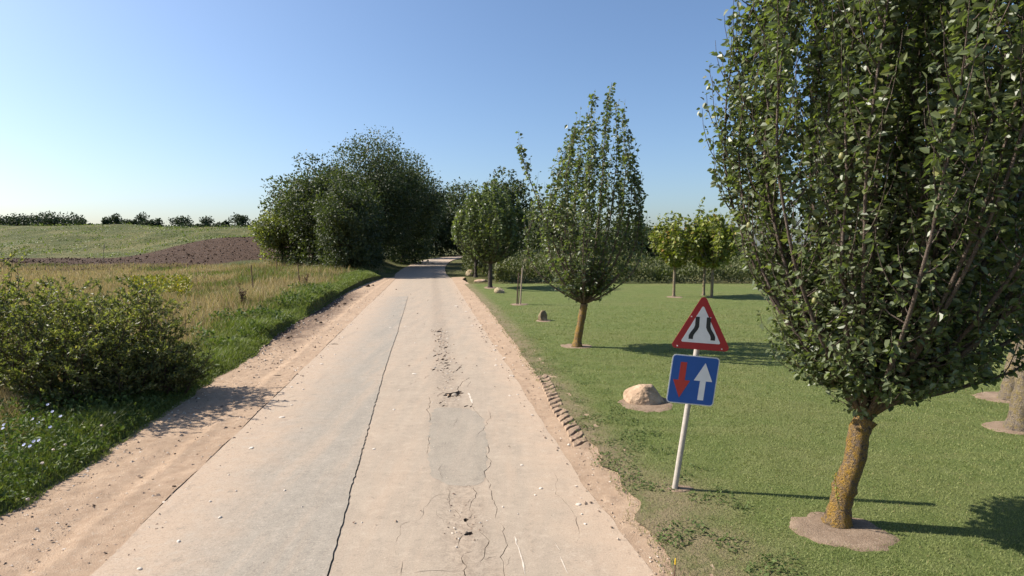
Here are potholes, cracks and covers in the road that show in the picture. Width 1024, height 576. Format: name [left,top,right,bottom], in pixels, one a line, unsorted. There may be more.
crack [400,444,506,576]
